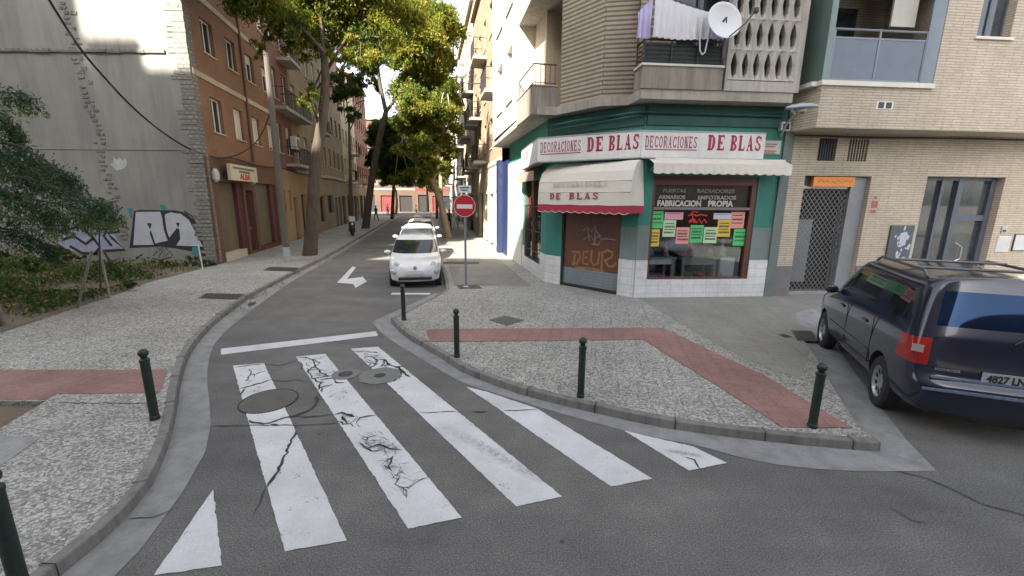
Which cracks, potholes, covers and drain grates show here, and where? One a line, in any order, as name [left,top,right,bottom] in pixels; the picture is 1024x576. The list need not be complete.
crack [900,471,1024,515]
crack [235,357,348,517]
crack [359,430,428,498]
manhole cover [237,388,299,414]
utility cover [359,367,401,385]
utility cover [331,369,360,380]
utility cover [490,316,523,326]
utility cover [791,330,818,341]
